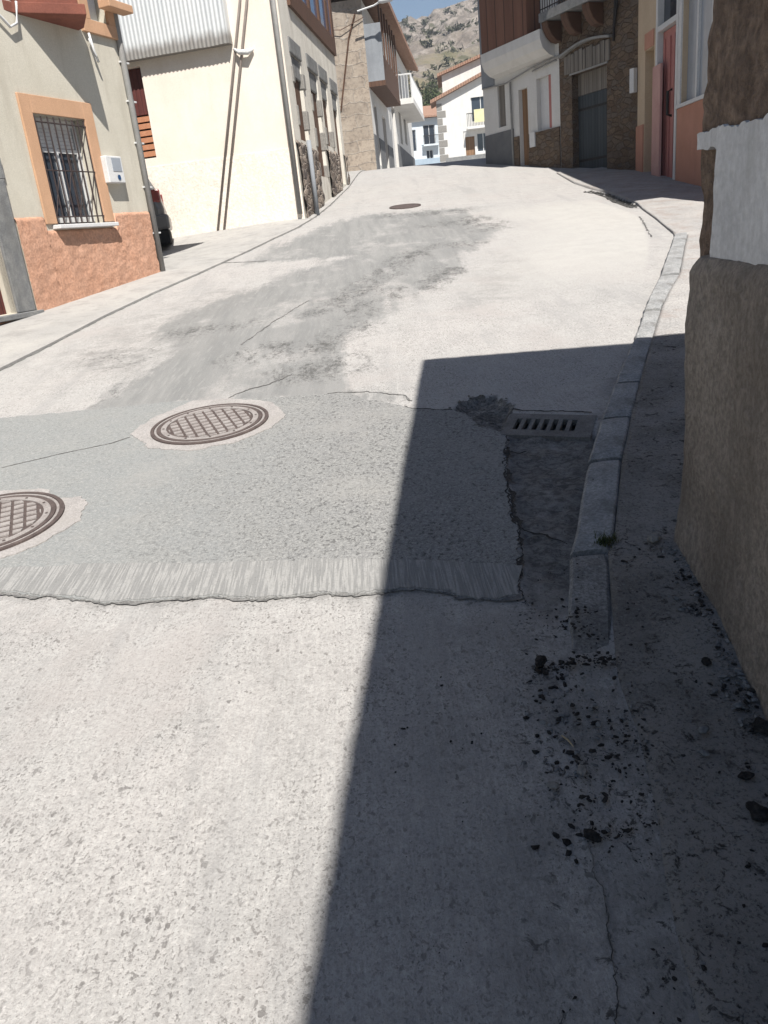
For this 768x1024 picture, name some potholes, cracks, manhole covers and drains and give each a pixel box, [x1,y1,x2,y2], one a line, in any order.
crack [0,435,567,605]
drain grate [500,413,597,441]
pothole [448,394,514,432]
crack [580,831,619,1024]
manhole cover [130,398,285,451]
manhole cover [0,488,88,559]
